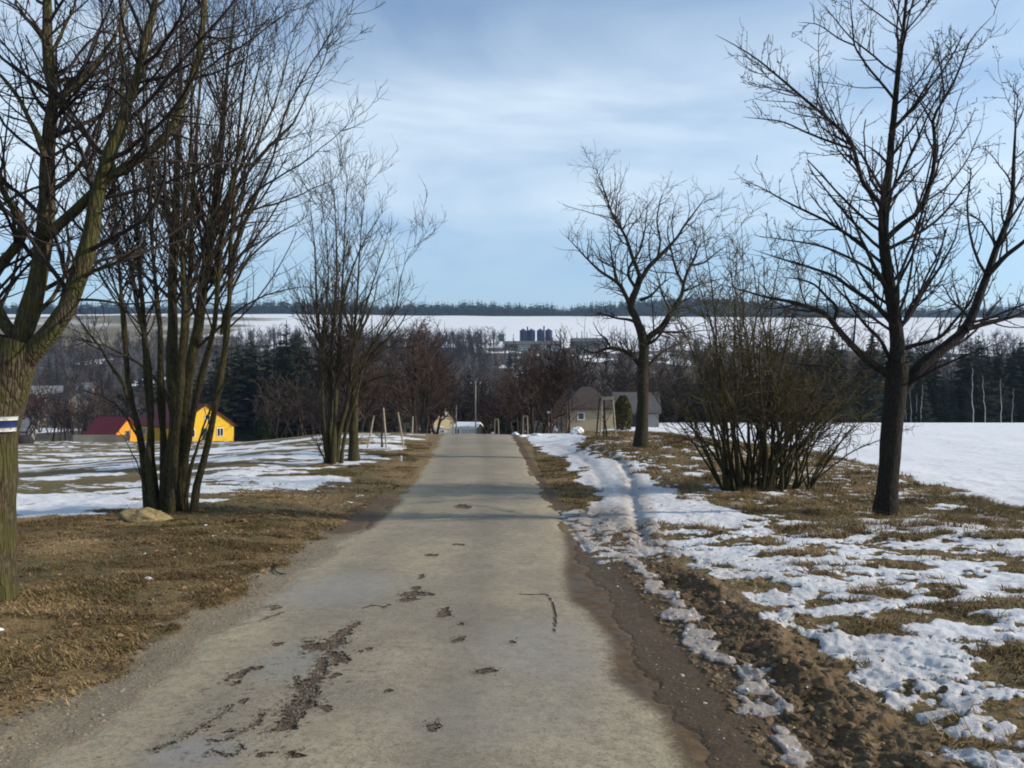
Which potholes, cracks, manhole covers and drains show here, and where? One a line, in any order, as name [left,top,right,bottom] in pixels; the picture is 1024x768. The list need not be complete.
pothole [398,586,434,602]
pothole [269,622,361,732]
pothole [224,668,250,686]
crack [520,594,557,632]
